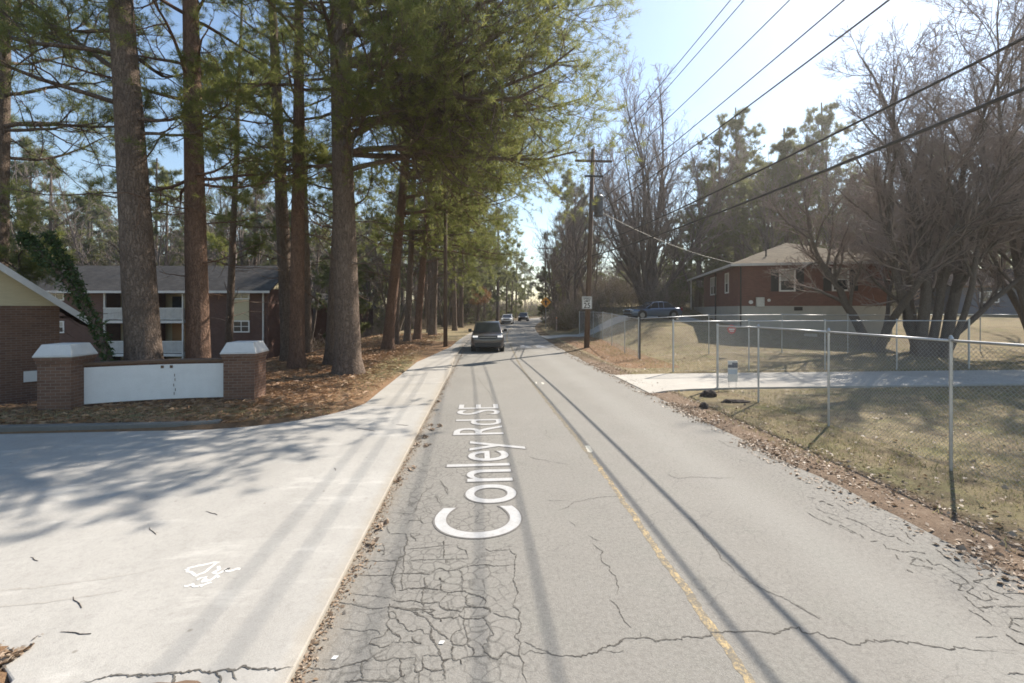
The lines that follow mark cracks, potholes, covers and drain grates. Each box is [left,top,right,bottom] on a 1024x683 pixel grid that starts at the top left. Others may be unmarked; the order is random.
crack [309,480,1024,683]
crack [81,665,292,683]
